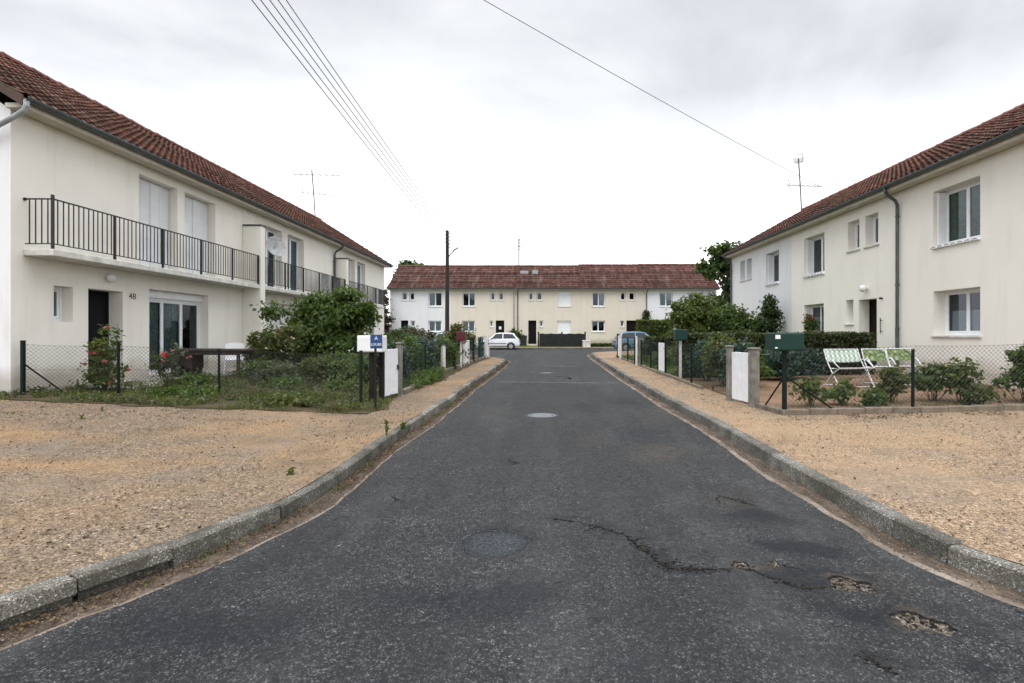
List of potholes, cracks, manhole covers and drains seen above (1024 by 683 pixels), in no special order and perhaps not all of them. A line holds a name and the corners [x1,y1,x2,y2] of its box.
pothole [889,610,958,636]
manhole cover [457,528,537,561]
pothole [731,561,750,571]
crack [715,496,757,506]
crack [546,518,828,592]
pothole [826,575,877,593]
